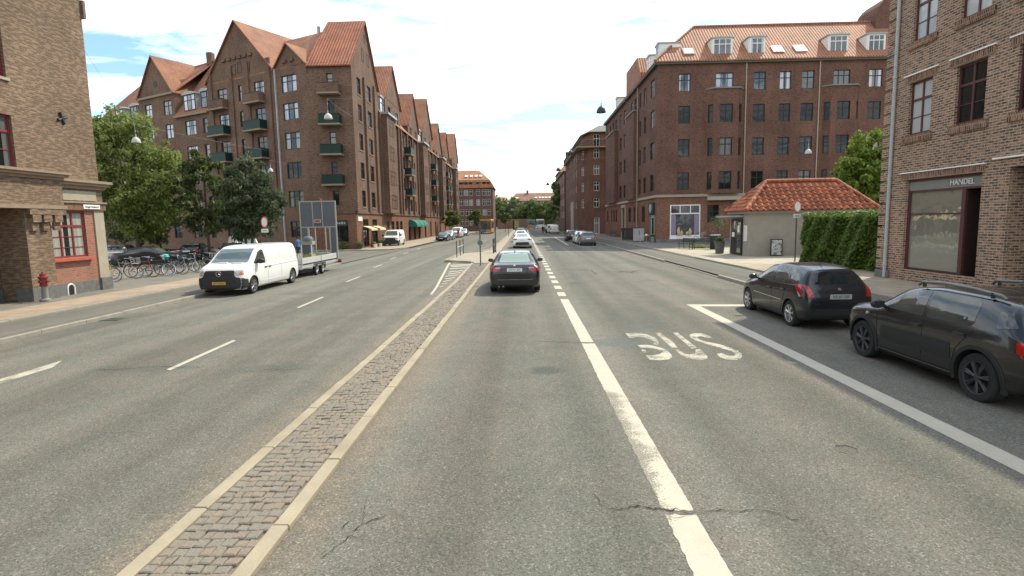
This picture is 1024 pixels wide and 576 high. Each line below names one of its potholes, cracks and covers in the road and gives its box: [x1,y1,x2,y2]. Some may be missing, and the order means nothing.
crack [594,494,799,520]
